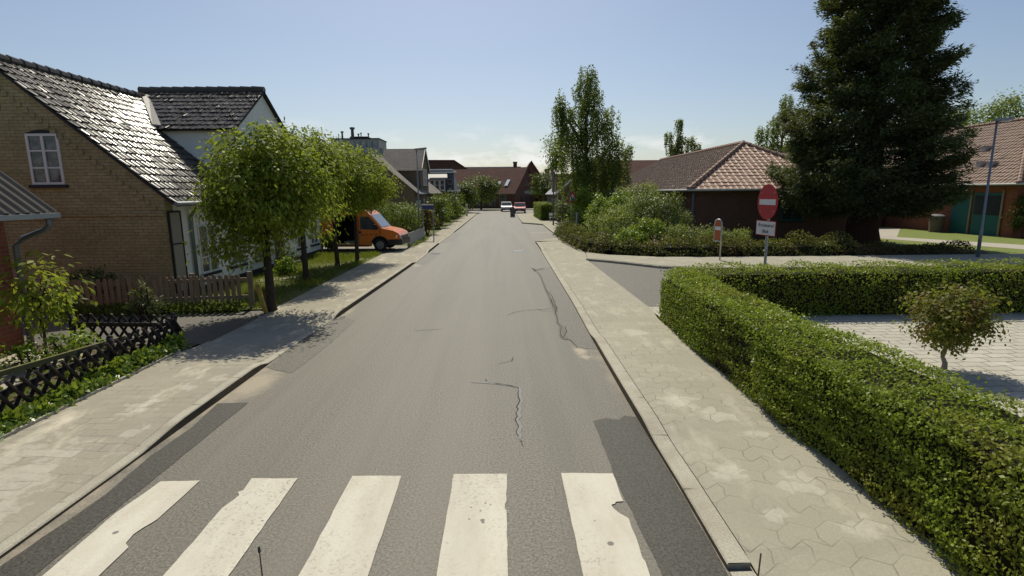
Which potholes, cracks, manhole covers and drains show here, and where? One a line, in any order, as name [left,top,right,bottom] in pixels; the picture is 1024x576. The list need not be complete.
crack [508,268,578,348]
